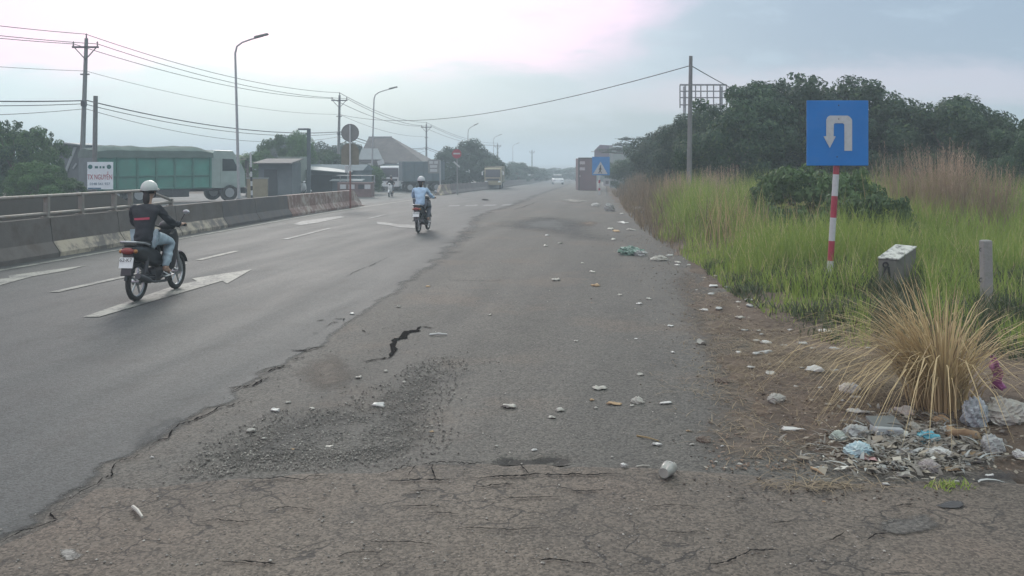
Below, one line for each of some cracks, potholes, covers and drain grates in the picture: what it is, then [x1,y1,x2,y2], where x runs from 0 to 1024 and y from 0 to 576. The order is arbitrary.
pothole [493,457,571,467]
crack [363,326,431,362]
crack [67,346,323,502]
crack [338,539,429,568]
crack [701,549,781,564]
crack [194,506,314,523]
crack [382,461,616,530]
